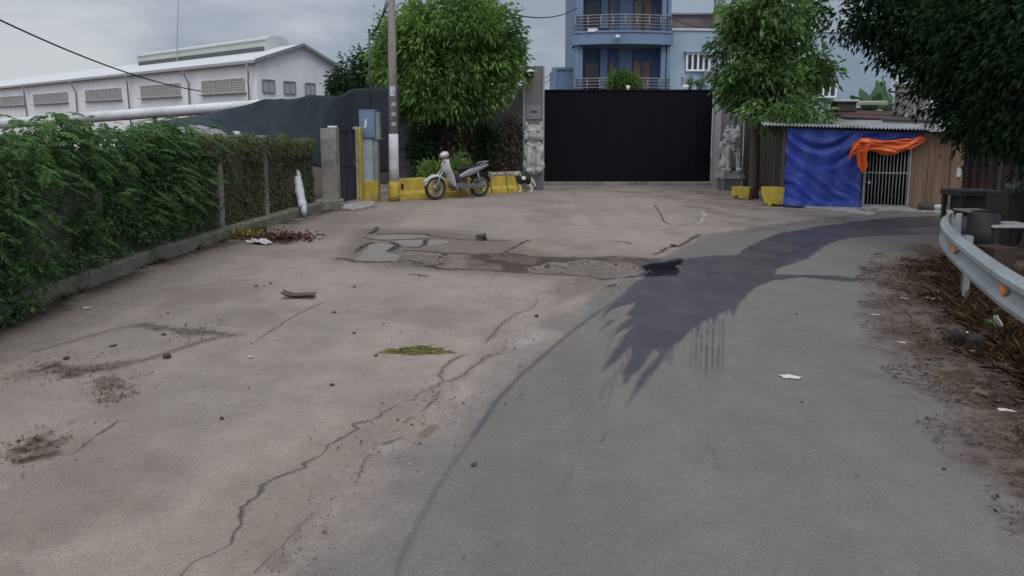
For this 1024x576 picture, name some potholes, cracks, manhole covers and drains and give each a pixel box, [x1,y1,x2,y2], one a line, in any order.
crack [56,421,119,456]
crack [181,299,537,575]
pothole [637,257,689,277]
crack [654,205,700,254]
